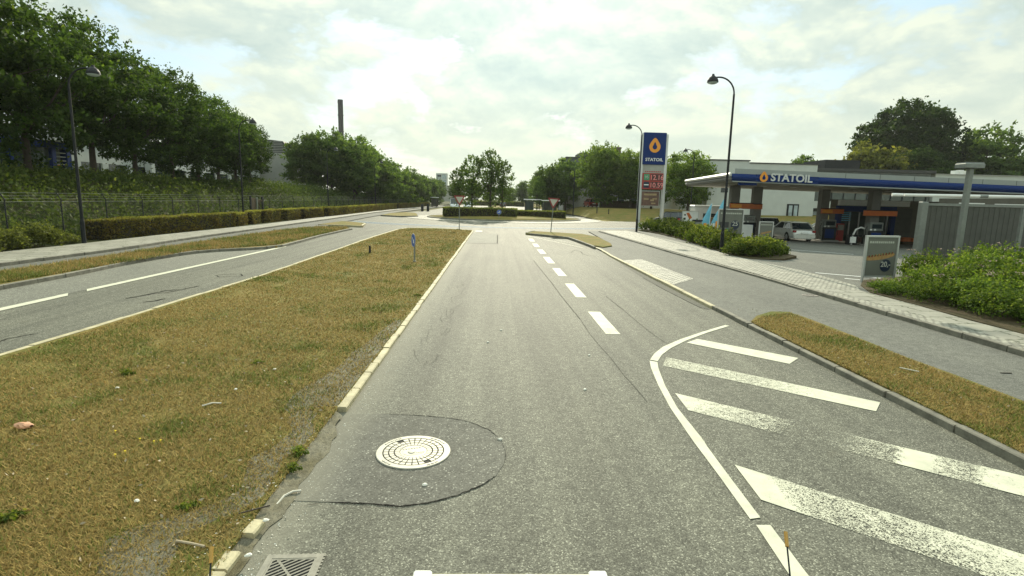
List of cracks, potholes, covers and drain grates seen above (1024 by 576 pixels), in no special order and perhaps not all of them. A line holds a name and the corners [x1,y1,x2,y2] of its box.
crack [126,286,197,302]
manhole cover [376,436,450,470]
drain grate [256,553,326,576]
